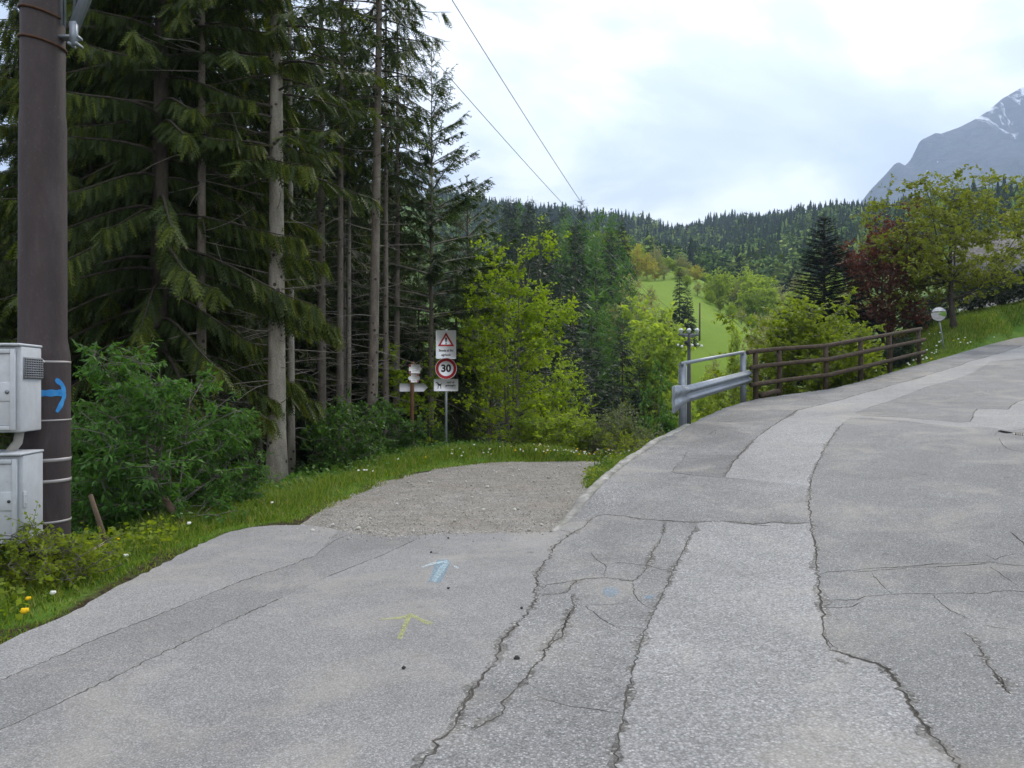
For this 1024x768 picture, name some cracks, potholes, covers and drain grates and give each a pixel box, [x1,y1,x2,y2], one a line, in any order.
crack [818,532,1024,694]
crack [419,515,809,768]
